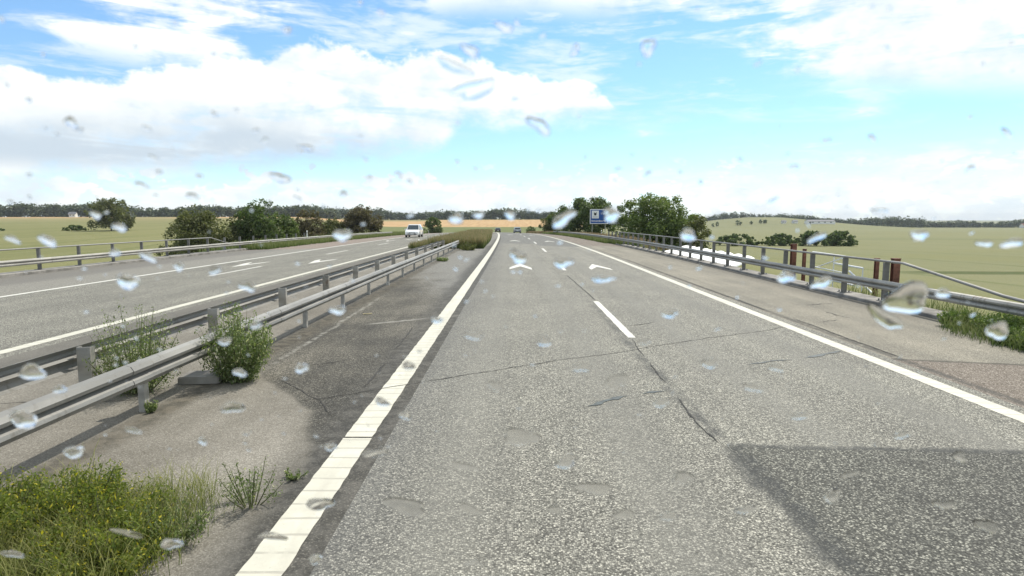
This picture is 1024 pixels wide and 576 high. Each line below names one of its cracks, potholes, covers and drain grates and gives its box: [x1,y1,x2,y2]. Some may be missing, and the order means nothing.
crack [12,327,780,418]
